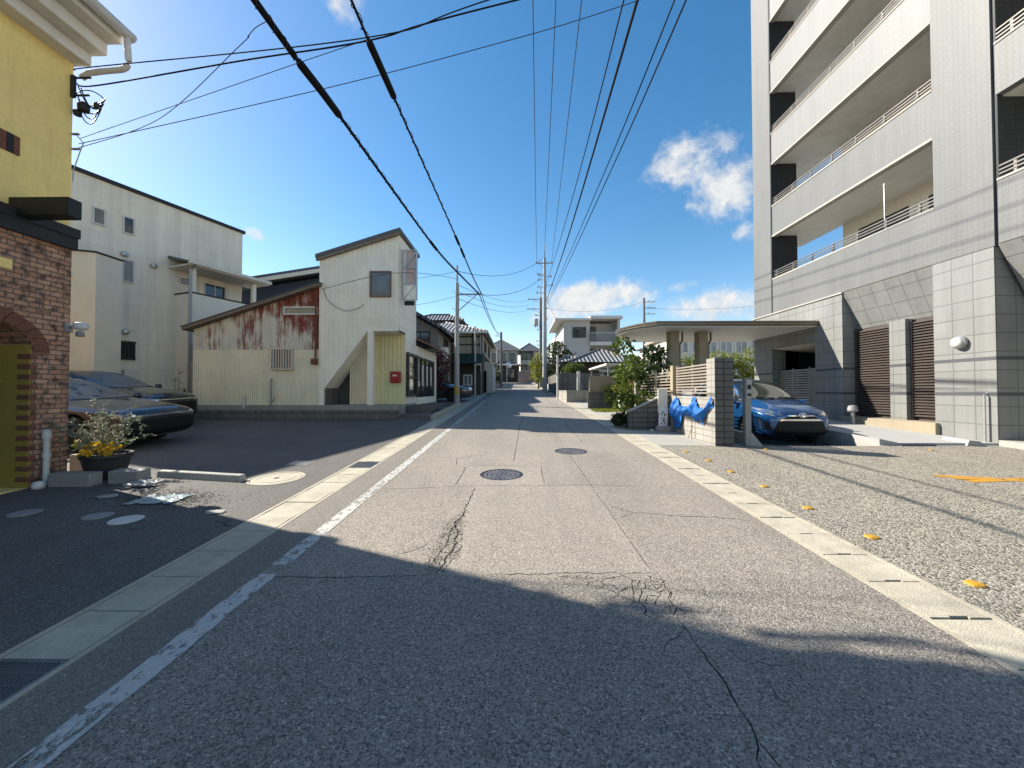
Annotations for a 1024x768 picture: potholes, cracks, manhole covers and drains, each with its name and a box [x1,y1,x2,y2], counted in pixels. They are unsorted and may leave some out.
manhole cover [246,471,306,486]
crack [491,572,803,768]
drain grate [0,660,68,704]
manhole cover [480,469,523,480]
crack [397,455,545,578]
